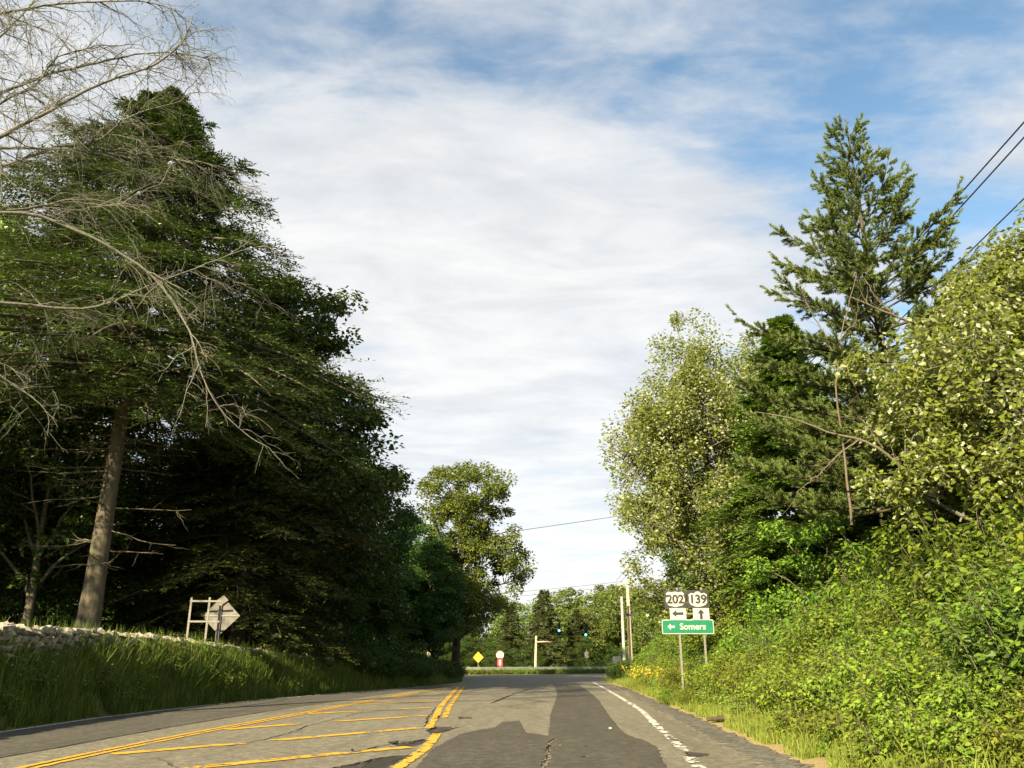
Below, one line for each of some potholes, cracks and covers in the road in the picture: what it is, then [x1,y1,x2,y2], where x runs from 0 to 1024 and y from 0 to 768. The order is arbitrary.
crack [338,742,398,755]
crack [541,738,561,768]
